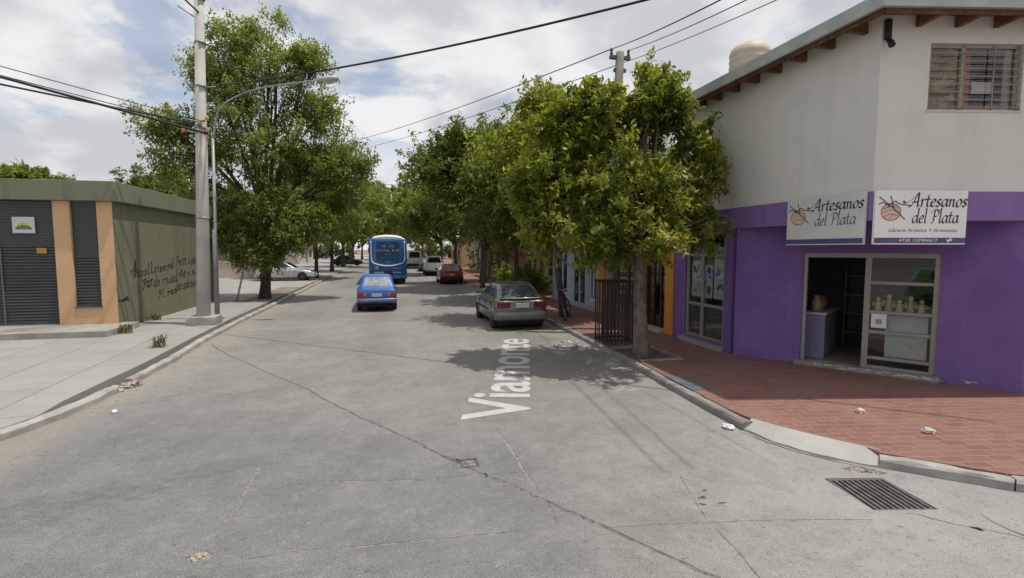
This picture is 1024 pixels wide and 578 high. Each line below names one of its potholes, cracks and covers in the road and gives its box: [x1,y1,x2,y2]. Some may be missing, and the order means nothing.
pothole [185,550,214,562]
crack [212,345,759,578]
drain grate [827,478,934,510]
manhole cover [459,458,479,468]
